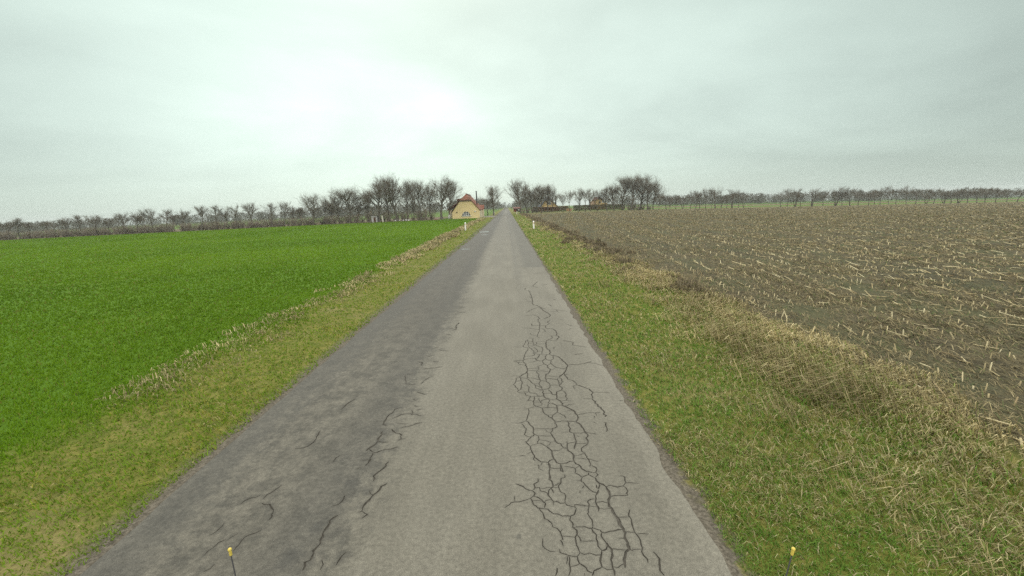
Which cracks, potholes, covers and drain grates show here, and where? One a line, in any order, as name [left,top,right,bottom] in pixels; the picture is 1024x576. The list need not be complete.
crack [506,288,664,576]
crack [303,323,459,570]
